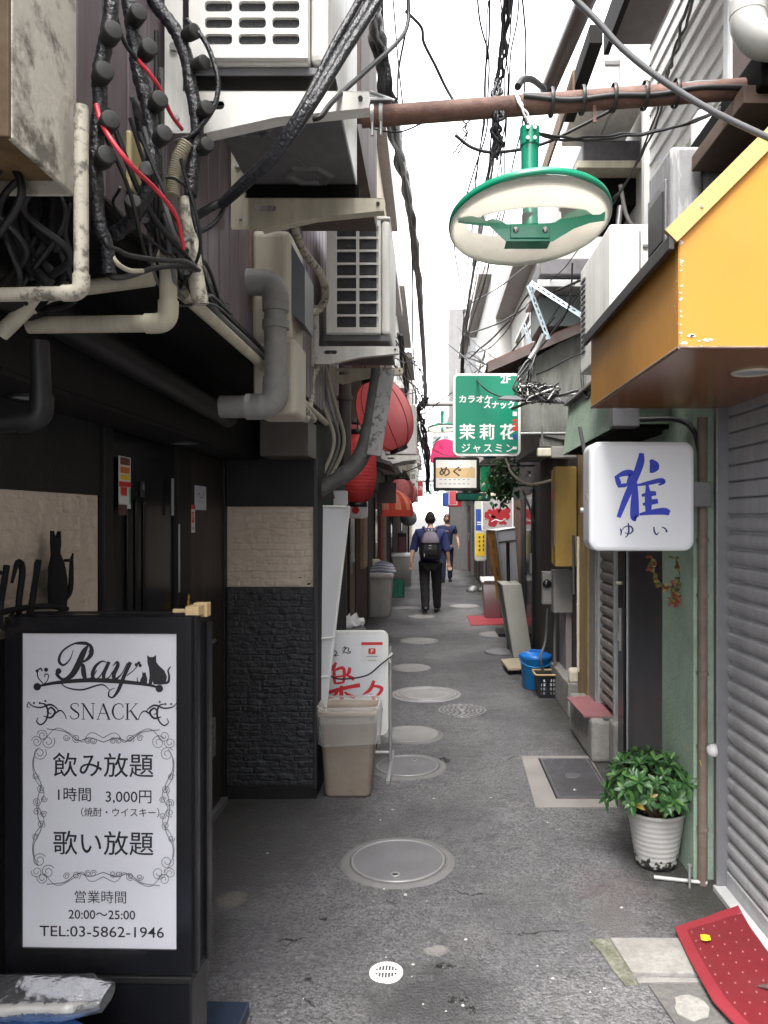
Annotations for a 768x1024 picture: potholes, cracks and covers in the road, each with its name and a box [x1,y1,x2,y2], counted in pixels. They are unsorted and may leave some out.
manhole cover [392,664,431,672]
manhole cover [392,686,461,702]
manhole cover [374,754,447,780]
manhole cover [341,837,455,889]
manhole cover [438,704,486,718]
manhole cover [377,725,443,744]
manhole cover [521,756,618,808]
